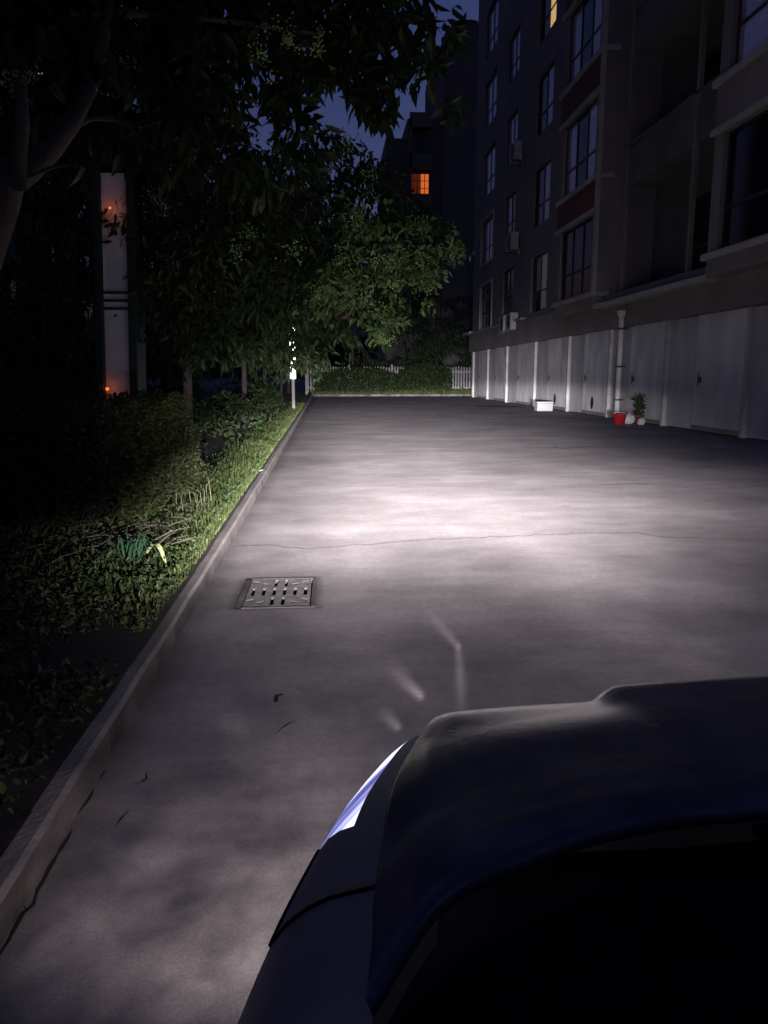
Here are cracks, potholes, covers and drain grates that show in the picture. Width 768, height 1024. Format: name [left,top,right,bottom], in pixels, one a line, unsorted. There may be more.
drain grate [234,577,317,609]
crack [0,771,105,955]
crack [238,532,768,549]
